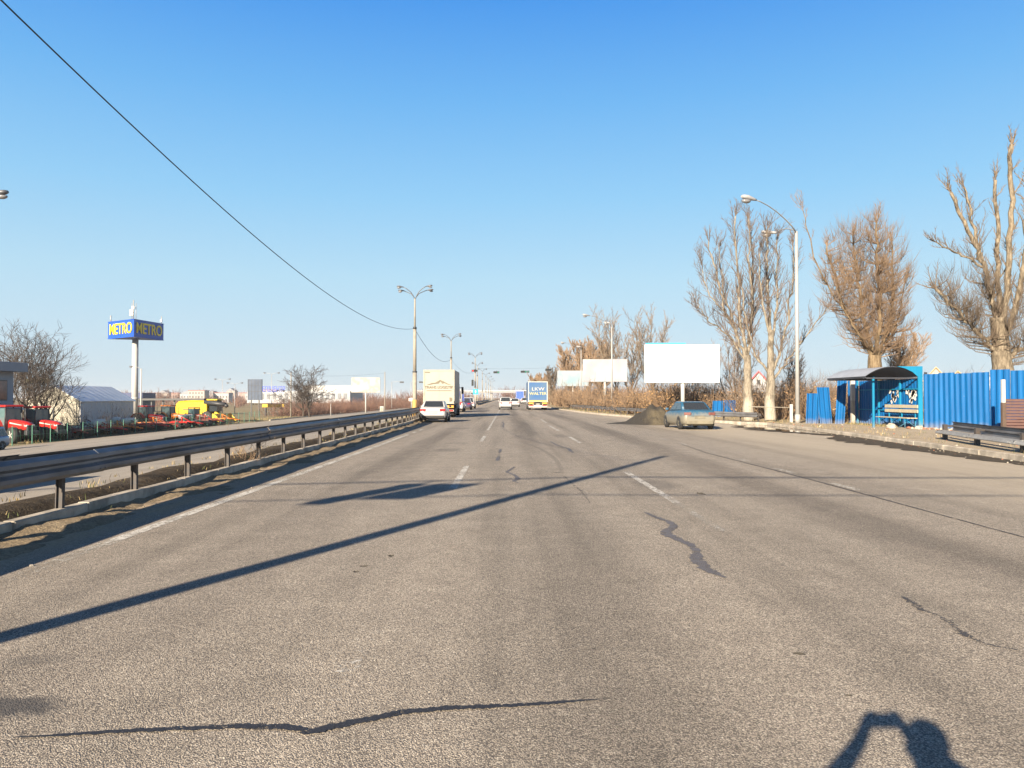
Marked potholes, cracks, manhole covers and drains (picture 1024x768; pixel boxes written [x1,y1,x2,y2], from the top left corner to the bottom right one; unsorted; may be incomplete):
crack [902,596,1018,650]
